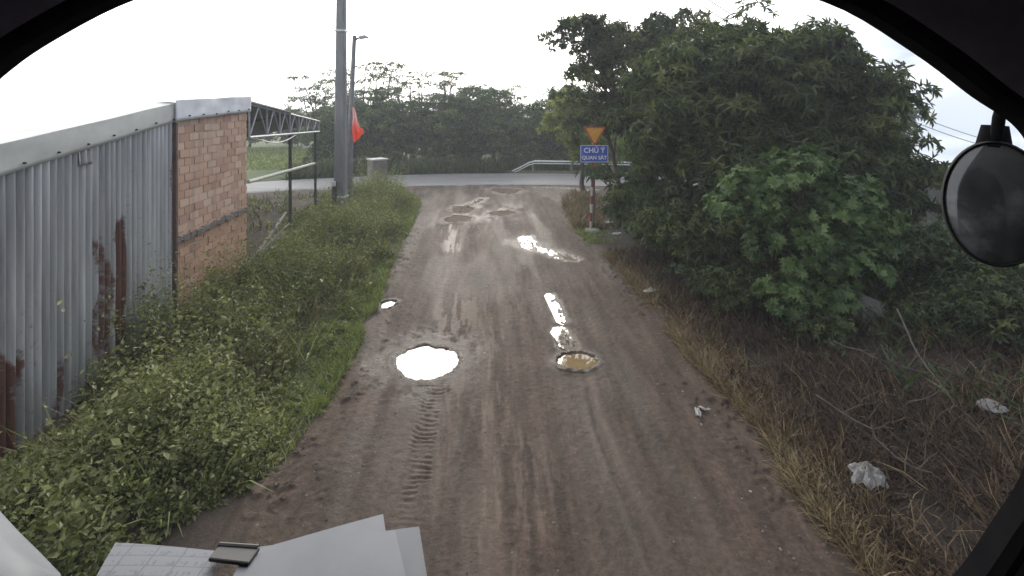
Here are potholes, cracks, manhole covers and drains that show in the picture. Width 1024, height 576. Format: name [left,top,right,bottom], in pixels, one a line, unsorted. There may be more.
pothole [378,299,400,309]
pothole [439,215,476,224]
pothole [448,205,478,214]
pothole [550,350,605,372]
pothole [486,187,525,195]
pothole [384,341,470,386]
